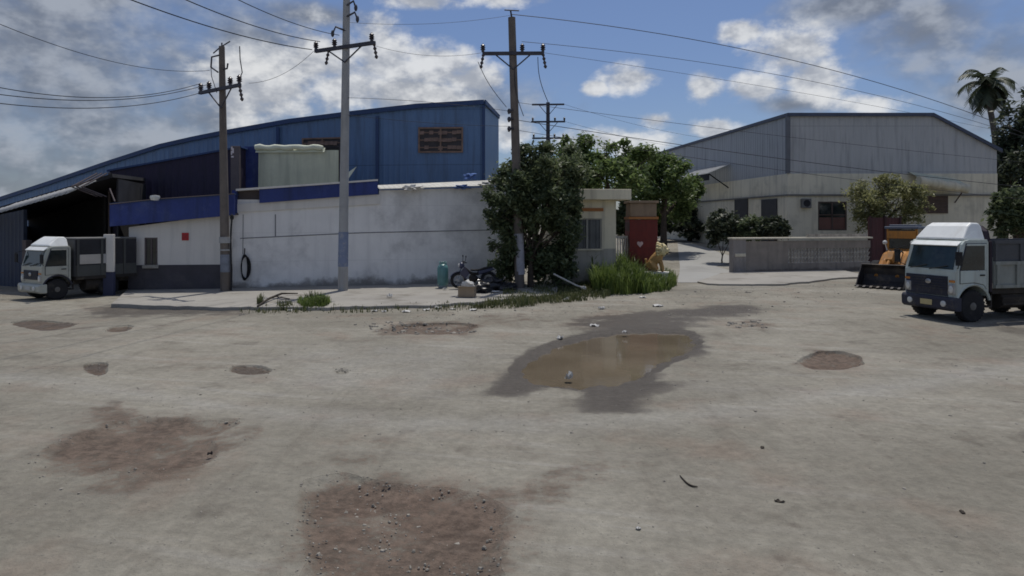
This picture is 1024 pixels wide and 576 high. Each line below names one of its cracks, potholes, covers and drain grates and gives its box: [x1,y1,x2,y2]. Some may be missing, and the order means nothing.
pothole [389,323,478,335]
pothole [293,472,516,576]
pothole [228,365,273,375]
pothole [82,362,109,376]
pothole [11,320,77,331]
pothole [796,351,865,370]
pothole [507,329,706,391]
